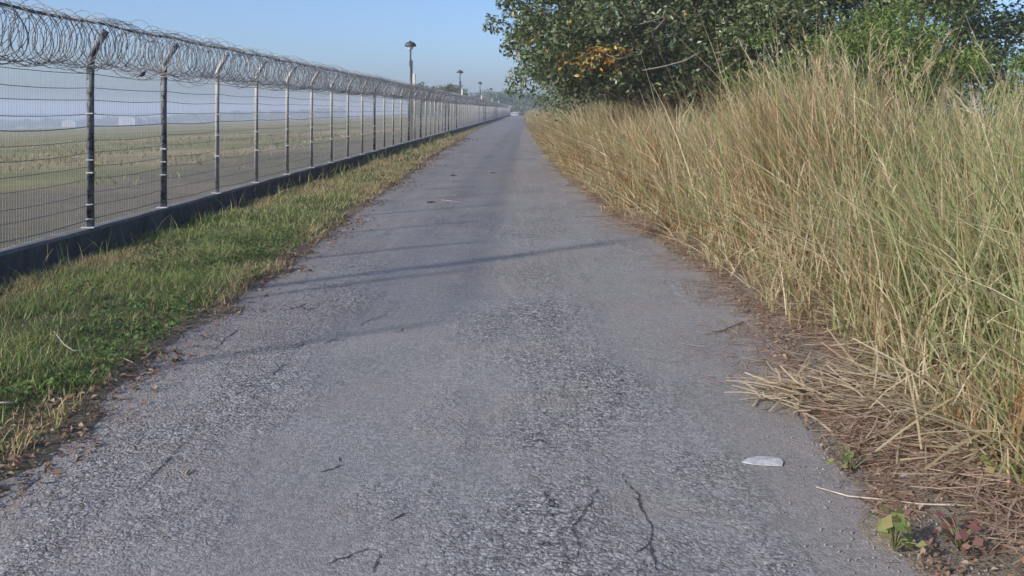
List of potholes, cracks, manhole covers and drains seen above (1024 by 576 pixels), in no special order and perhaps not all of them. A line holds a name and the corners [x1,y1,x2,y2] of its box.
crack [622,472,656,568]
crack [572,489,599,548]
crack [324,547,381,573]
